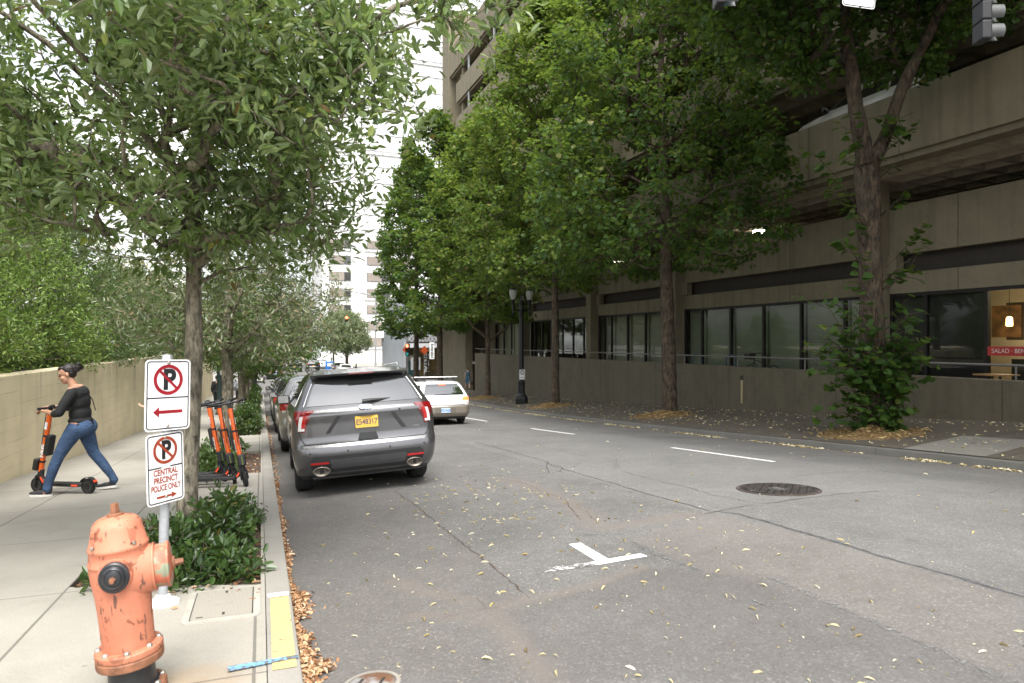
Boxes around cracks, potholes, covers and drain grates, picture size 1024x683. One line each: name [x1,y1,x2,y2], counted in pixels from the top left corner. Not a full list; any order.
utility cover [181,585,260,625]
manhole cover [736,483,822,496]
crack [395,491,527,616]
manhole cover [345,670,401,683]
crack [477,441,884,520]
